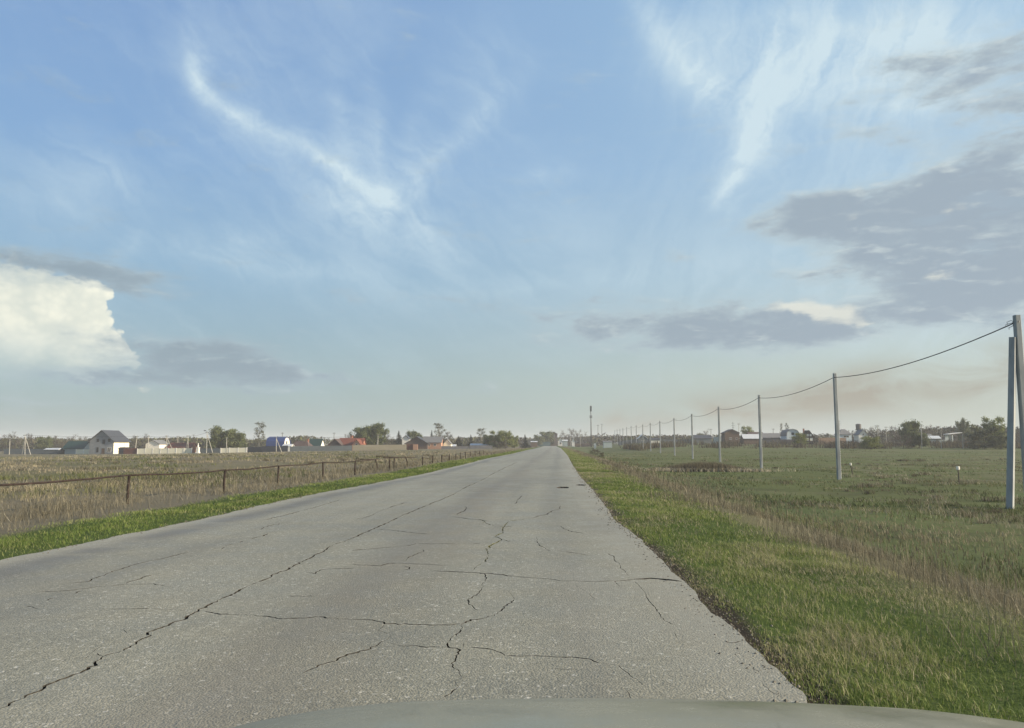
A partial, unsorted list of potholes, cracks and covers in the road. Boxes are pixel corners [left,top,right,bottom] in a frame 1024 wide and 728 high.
crack [3,467,678,708]
